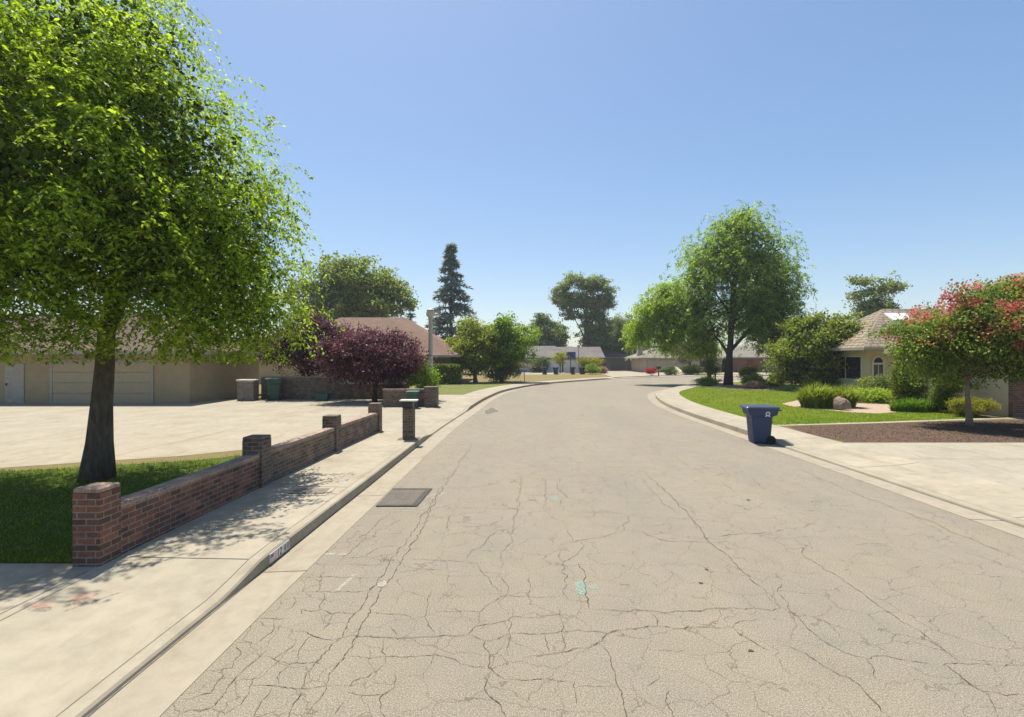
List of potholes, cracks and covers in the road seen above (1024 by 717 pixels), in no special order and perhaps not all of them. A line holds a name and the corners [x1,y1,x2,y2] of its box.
crack [183,445,1016,717]
